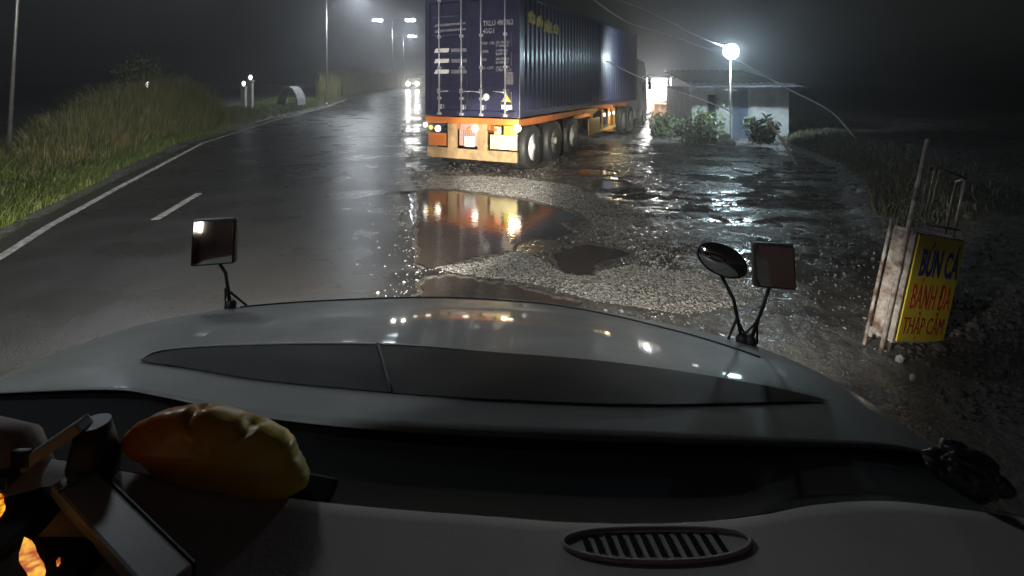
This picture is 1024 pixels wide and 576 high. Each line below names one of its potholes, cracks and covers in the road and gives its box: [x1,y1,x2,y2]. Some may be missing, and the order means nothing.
pothole [411,273,588,308]
pothole [413,188,580,270]
pothole [545,242,636,277]
pothole [571,167,620,176]
